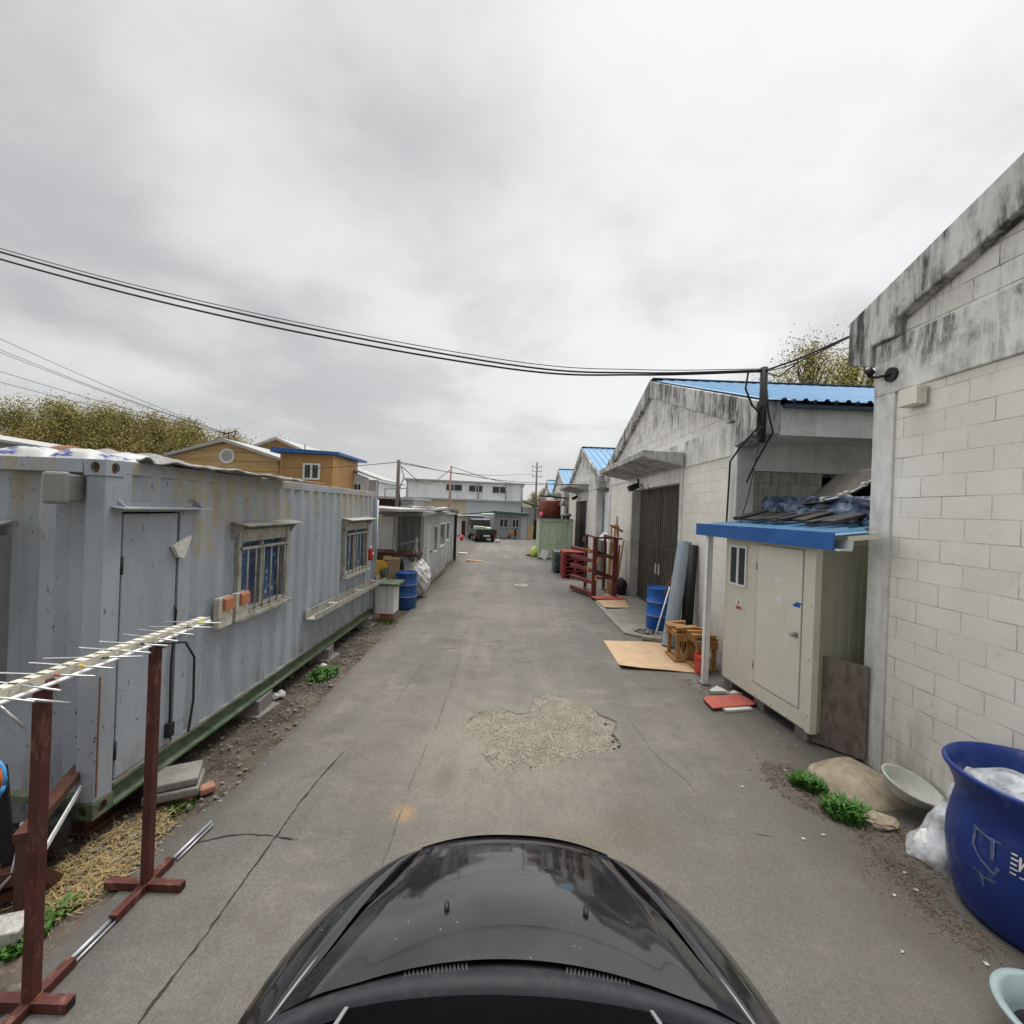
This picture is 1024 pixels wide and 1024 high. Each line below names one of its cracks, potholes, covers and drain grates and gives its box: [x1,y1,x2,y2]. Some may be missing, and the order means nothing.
crack [138,752,347,1024]
pothole [461,693,622,771]
